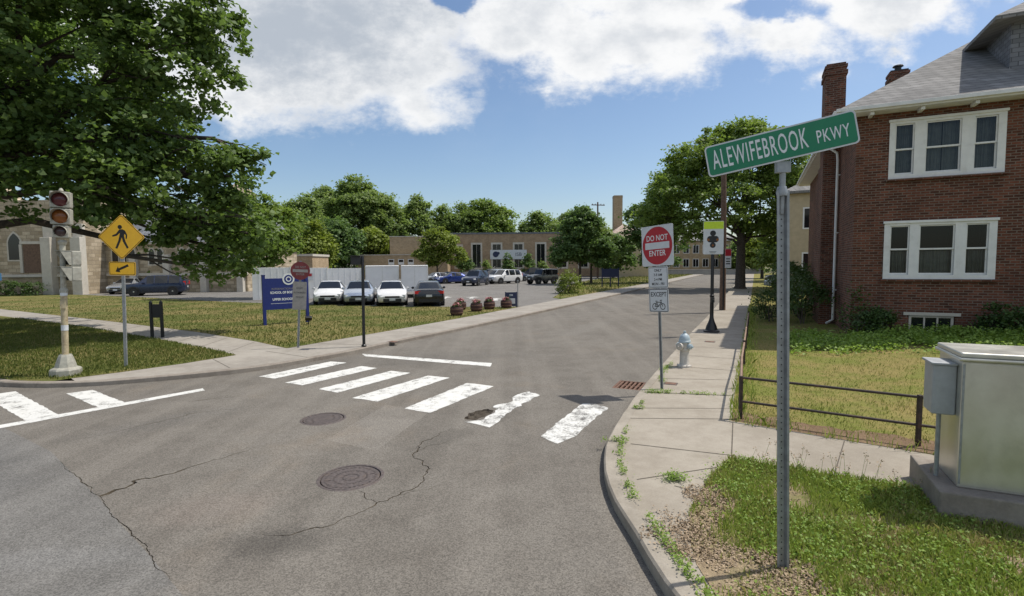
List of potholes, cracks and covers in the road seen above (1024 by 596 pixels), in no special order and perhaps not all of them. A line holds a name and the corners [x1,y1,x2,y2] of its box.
crack [55,397,260,592]
pothole [464,409,494,420]
crack [269,430,453,536]
drain grate [612,380,645,390]
manhole cover [316,464,384,491]
manhole cover [300,412,346,426]
